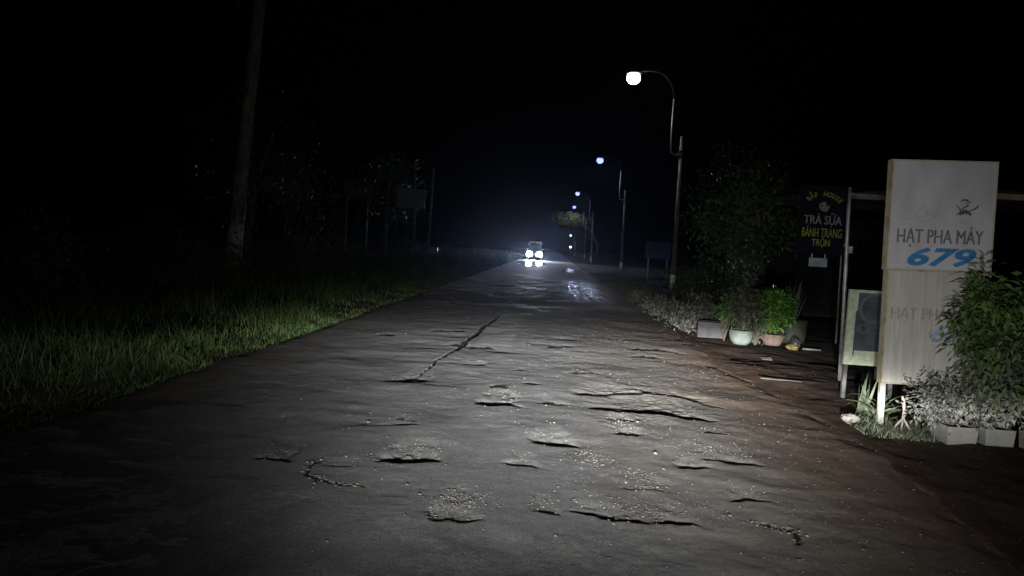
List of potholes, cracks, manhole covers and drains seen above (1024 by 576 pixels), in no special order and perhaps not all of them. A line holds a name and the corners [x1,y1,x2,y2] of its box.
pothole [427,490,482,523]
pothole [531,429,576,448]
crack [414,314,500,381]
pothole [504,457,538,468]
pothole [535,503,561,515]
pothole [614,424,640,437]
pothole [675,461,709,470]
pothole [257,449,299,462]
pothole [574,504,697,526]
pothole [380,443,438,464]
pothole [477,395,522,408]
crack [304,457,363,487]
